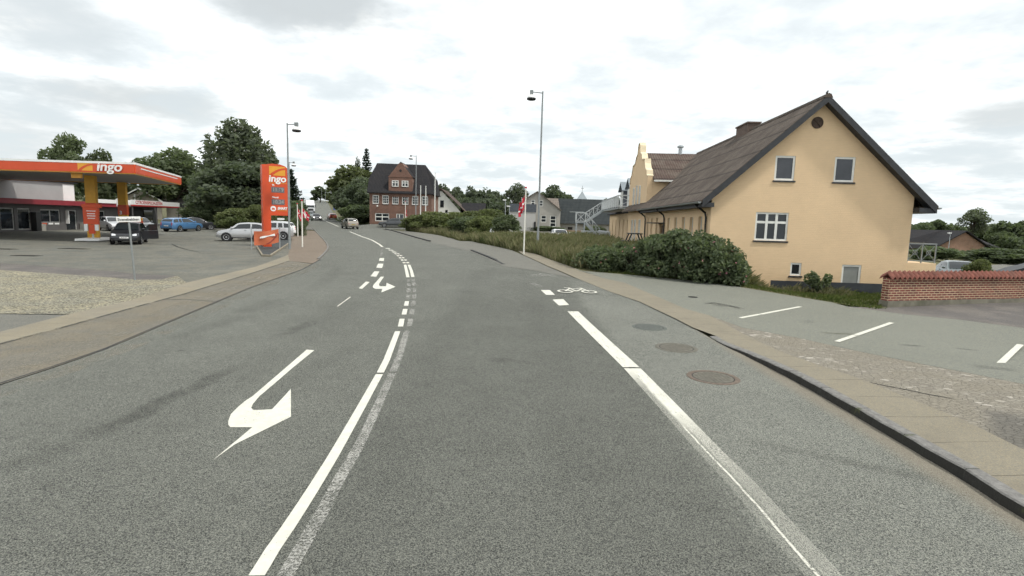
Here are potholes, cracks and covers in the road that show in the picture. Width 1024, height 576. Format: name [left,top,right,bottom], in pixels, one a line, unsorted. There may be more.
manhole cover [655,343,698,353]
manhole cover [686,370,741,385]
